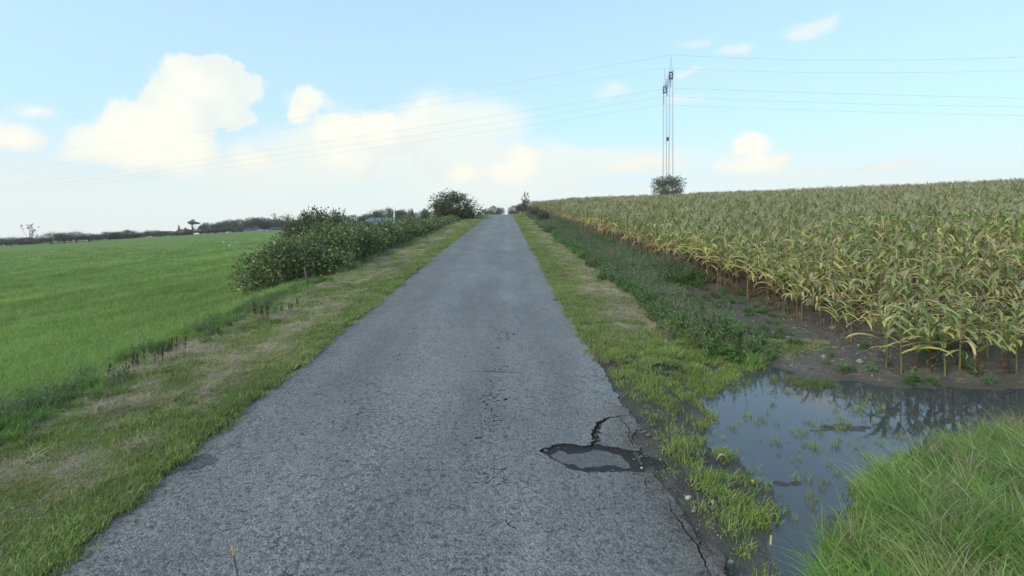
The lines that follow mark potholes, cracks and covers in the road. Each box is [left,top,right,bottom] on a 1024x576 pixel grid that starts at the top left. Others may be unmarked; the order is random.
pothole [539,443,667,473]
crack [627,472,713,576]
